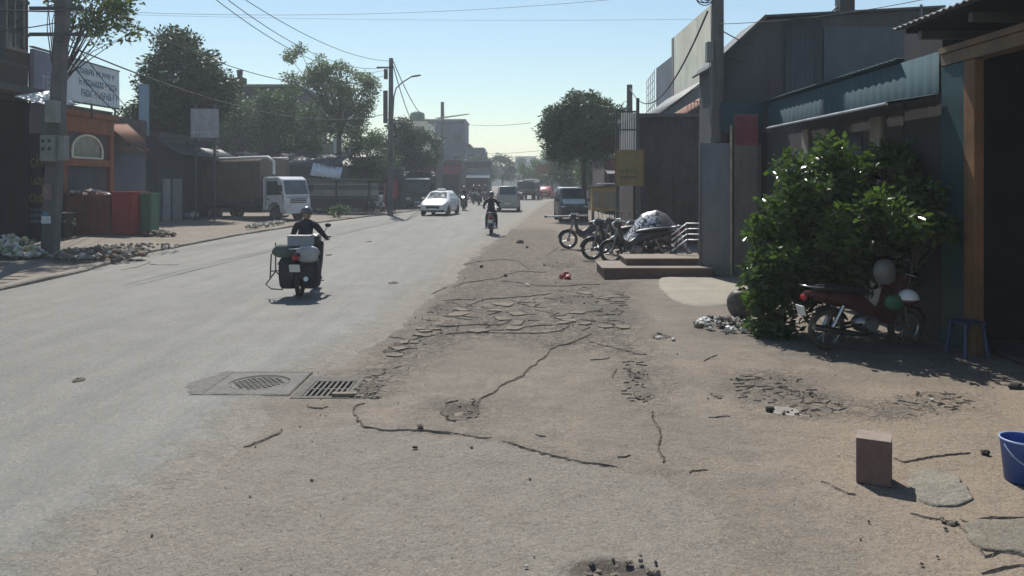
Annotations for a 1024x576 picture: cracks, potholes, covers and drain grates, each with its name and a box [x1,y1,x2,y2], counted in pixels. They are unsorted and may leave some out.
drain grate [289,376,366,399]
pothole [569,557,661,576]
pothole [440,404,480,420]
crack [733,374,846,416]
crack [352,247,666,468]
